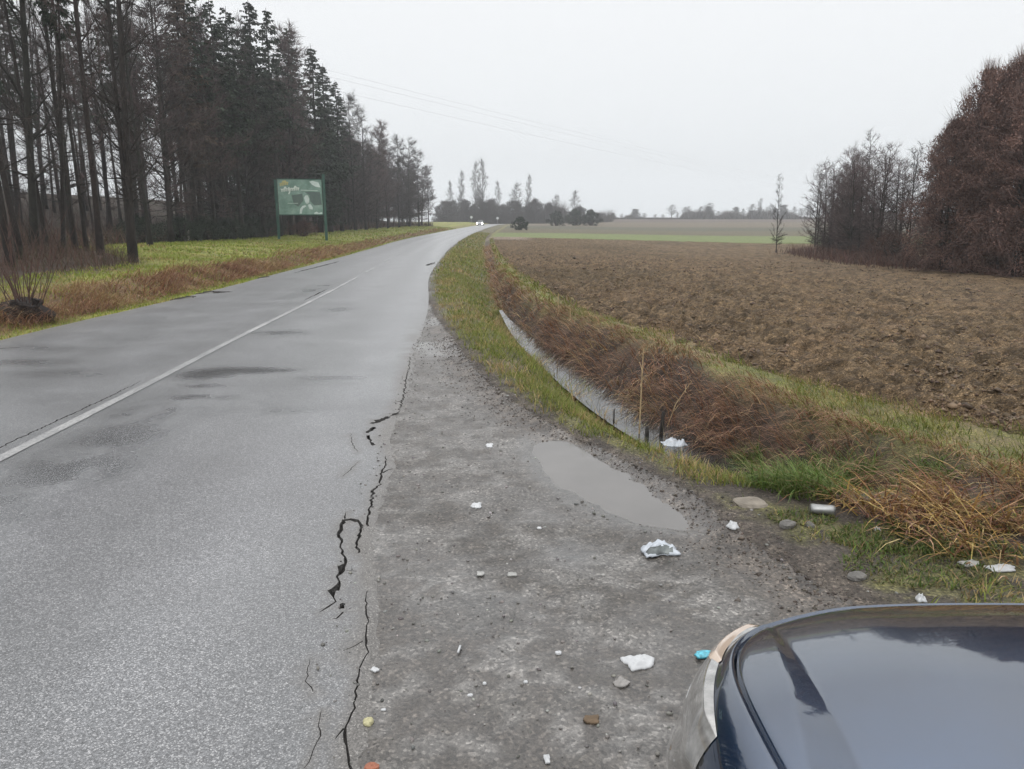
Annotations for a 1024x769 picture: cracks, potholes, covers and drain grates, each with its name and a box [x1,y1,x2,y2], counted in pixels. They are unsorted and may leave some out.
crack [304,357,411,769]
